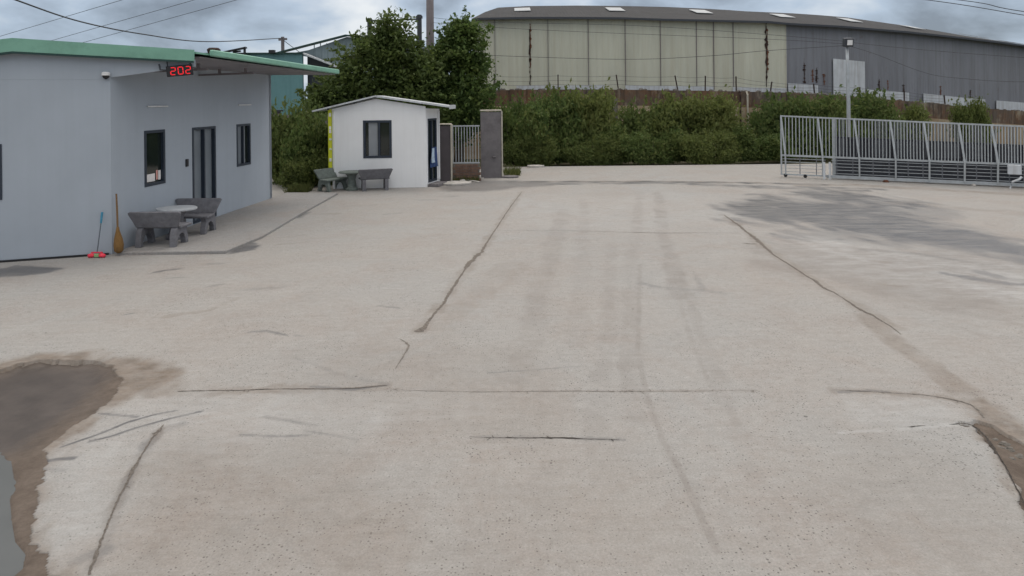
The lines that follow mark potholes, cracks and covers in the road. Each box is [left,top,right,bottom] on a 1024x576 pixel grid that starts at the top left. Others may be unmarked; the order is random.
crack [88,424,164,575]
pothole [0,362,123,576]
crack [833,389,1024,503]
pothole [960,423,1024,510]
crack [724,215,898,332]
crack [396,193,521,367]
